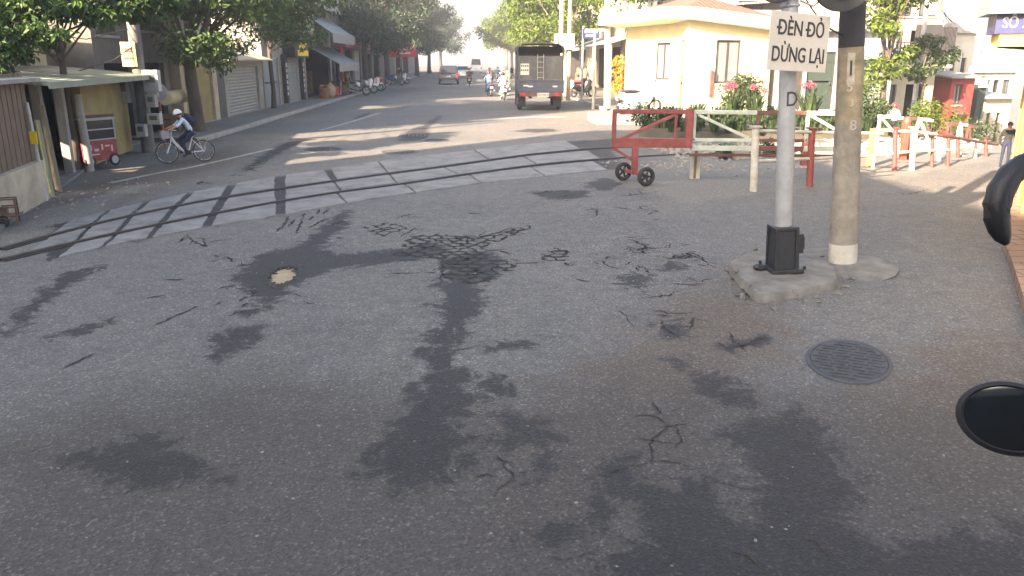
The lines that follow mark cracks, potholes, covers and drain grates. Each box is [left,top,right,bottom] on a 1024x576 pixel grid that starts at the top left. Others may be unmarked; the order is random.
crack [606,401,694,474]
crack [146,279,197,325]
crack [363,213,578,284]
manhole cover [806,339,893,385]
pothole [262,263,304,288]
crack [577,236,763,350]
